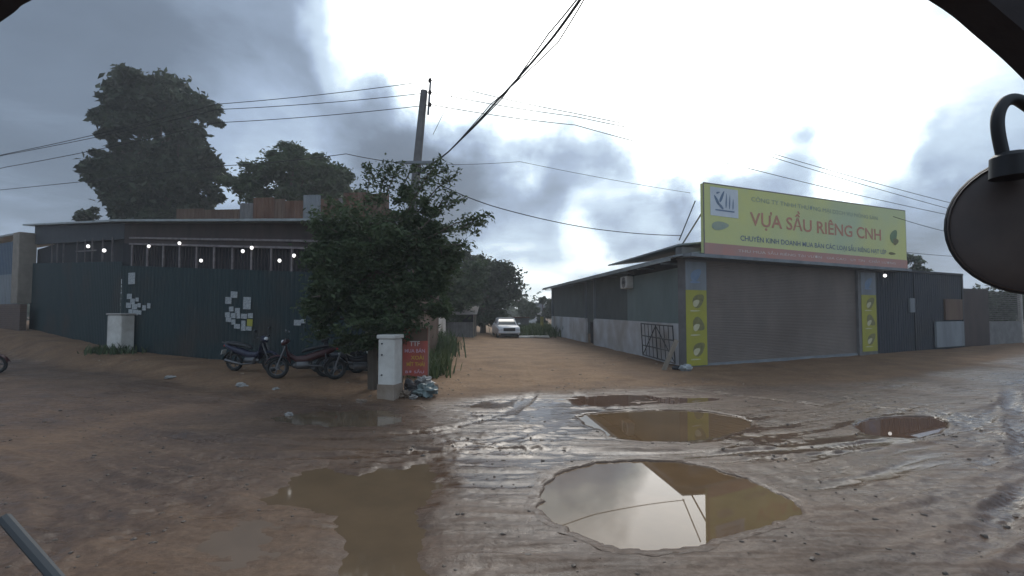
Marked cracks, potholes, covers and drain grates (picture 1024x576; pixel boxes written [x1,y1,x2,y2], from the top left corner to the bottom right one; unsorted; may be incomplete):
pothole [524,456,815,556]
pothole [847,414,957,439]
pothole [260,464,443,576]
pothole [571,408,760,443]
